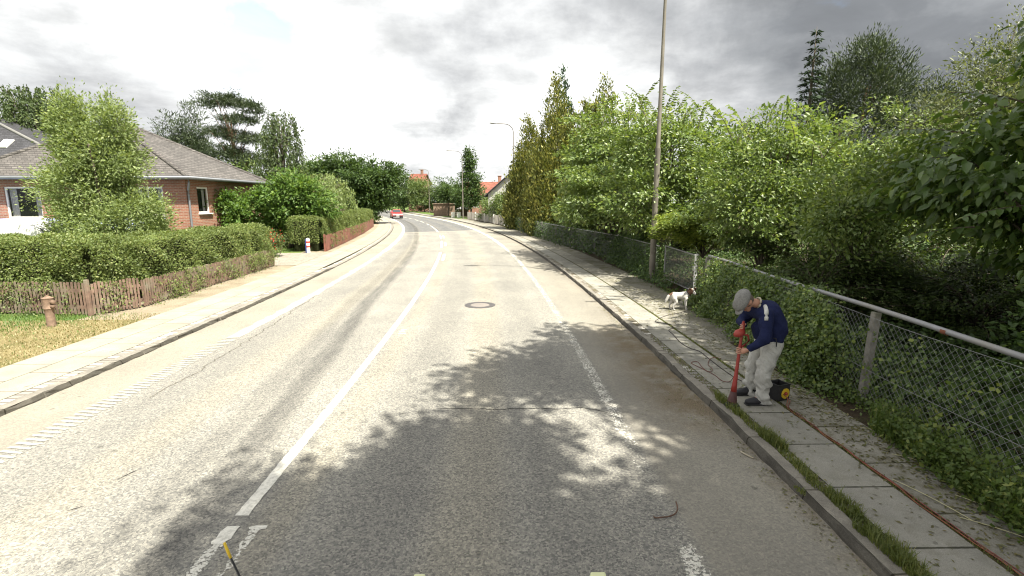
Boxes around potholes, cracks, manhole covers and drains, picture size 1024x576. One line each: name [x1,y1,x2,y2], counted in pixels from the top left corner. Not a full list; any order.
crack [149,297,314,398]
